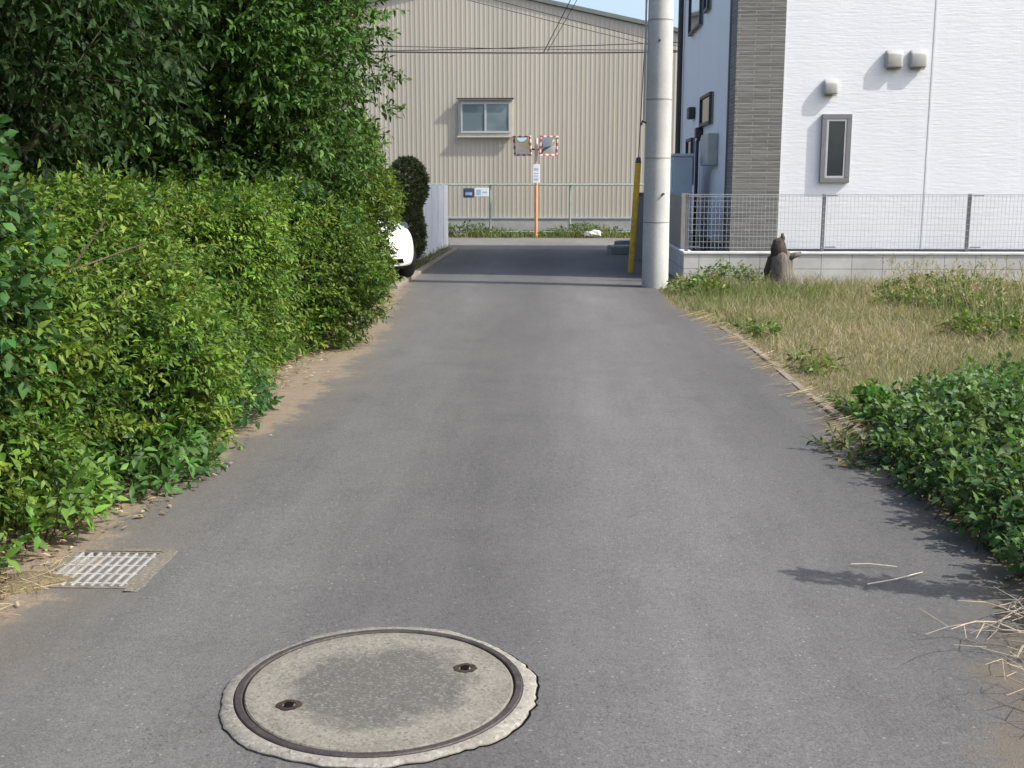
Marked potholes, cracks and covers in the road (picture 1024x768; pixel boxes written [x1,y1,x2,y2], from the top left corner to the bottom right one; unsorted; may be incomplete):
manhole cover [219,627,540,768]
drain grate [48,548,178,592]
